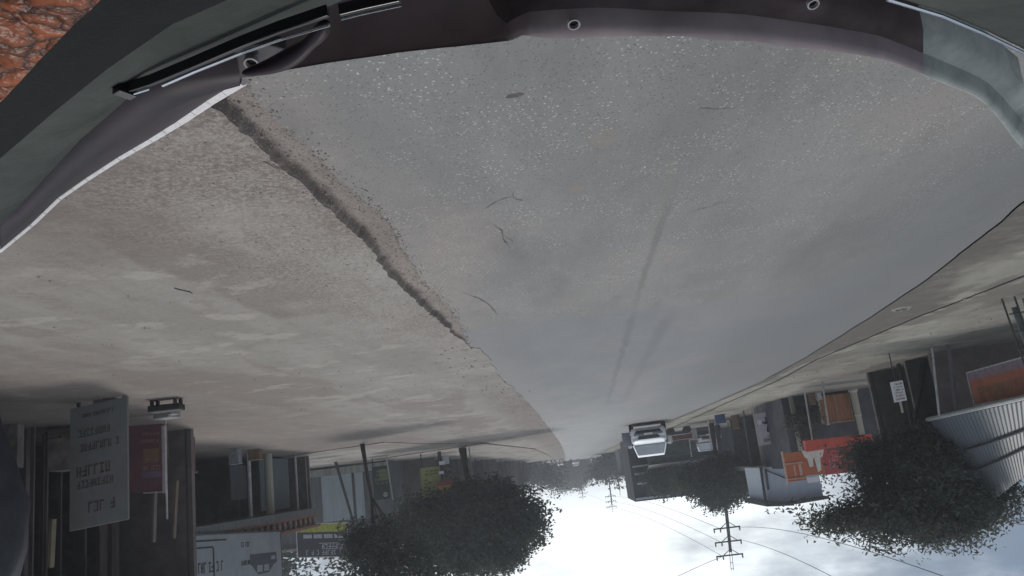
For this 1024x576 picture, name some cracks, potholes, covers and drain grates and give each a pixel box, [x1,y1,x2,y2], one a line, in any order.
crack [211,86,496,347]
